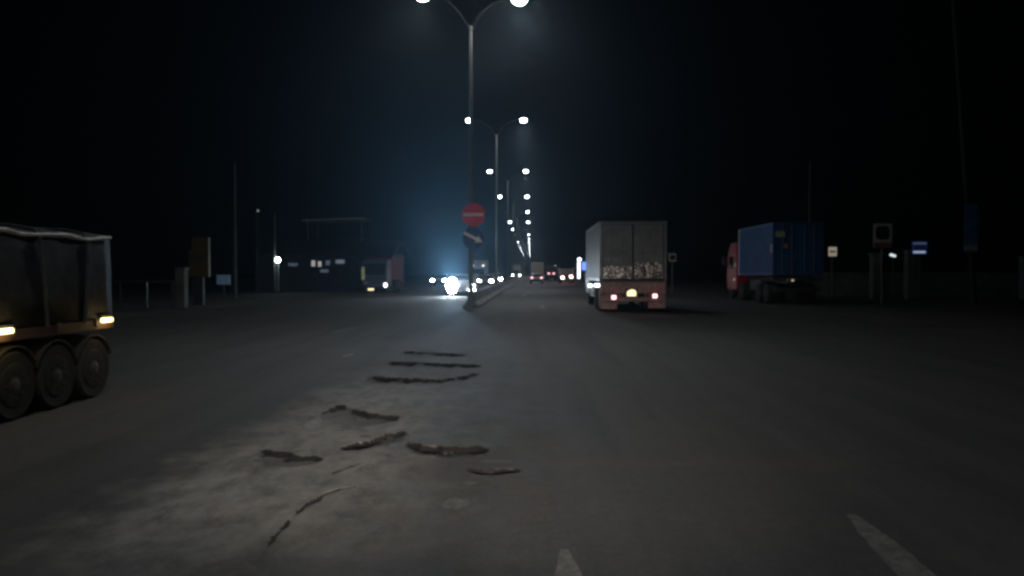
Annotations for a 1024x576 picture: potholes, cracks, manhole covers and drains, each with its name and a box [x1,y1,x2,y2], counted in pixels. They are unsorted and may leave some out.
crack [247,459,378,563]
pothole [384,361,485,369]
pothole [334,429,417,452]
pothole [397,440,497,461]
pothole [311,404,405,428]
pothole [246,447,333,470]
pothole [458,466,526,479]
pothole [359,373,485,385]
